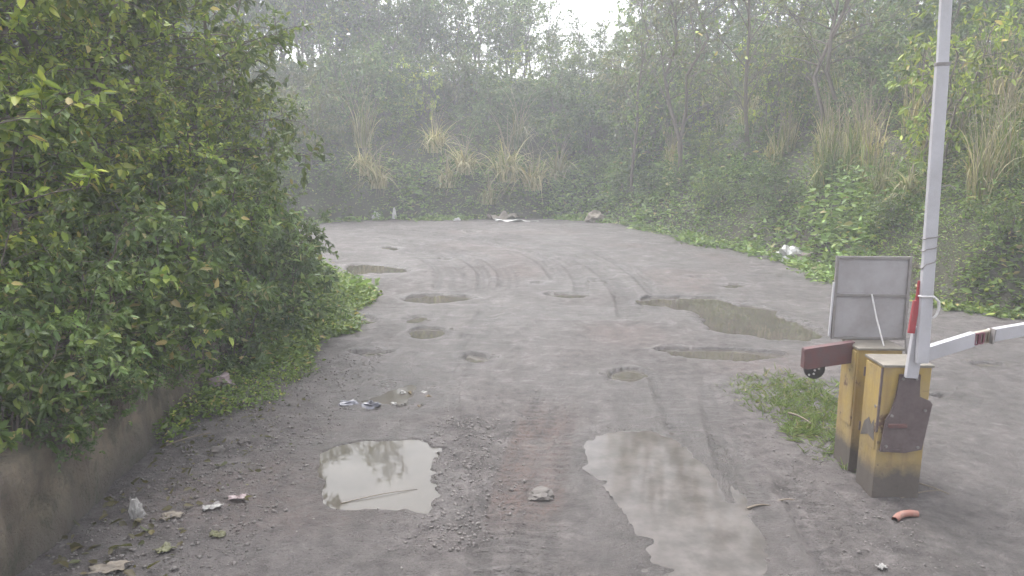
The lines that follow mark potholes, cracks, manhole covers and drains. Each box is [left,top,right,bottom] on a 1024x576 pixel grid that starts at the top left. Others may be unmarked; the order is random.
pothole [549,420,809,576]
pothole [280,428,476,530]
pothole [331,260,430,278]
pothole [618,292,842,348]
pothole [631,339,801,370]
pothole [379,289,498,308]
